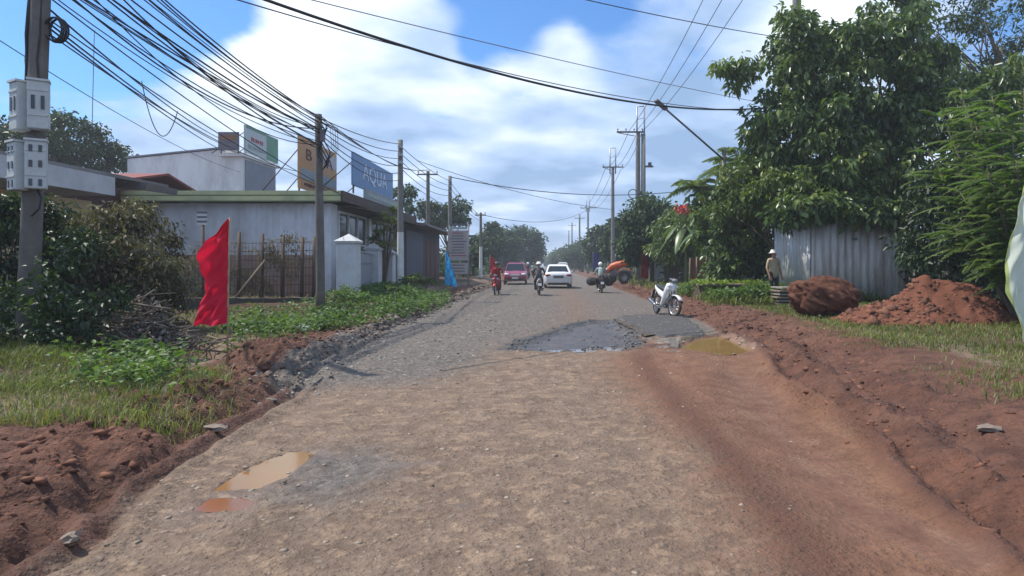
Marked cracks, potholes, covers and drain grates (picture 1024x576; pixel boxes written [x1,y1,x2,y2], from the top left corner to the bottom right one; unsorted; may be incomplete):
pothole [506,318,690,352]
pothole [194,497,254,513]
pothole [670,330,765,355]
pothole [200,448,314,495]
